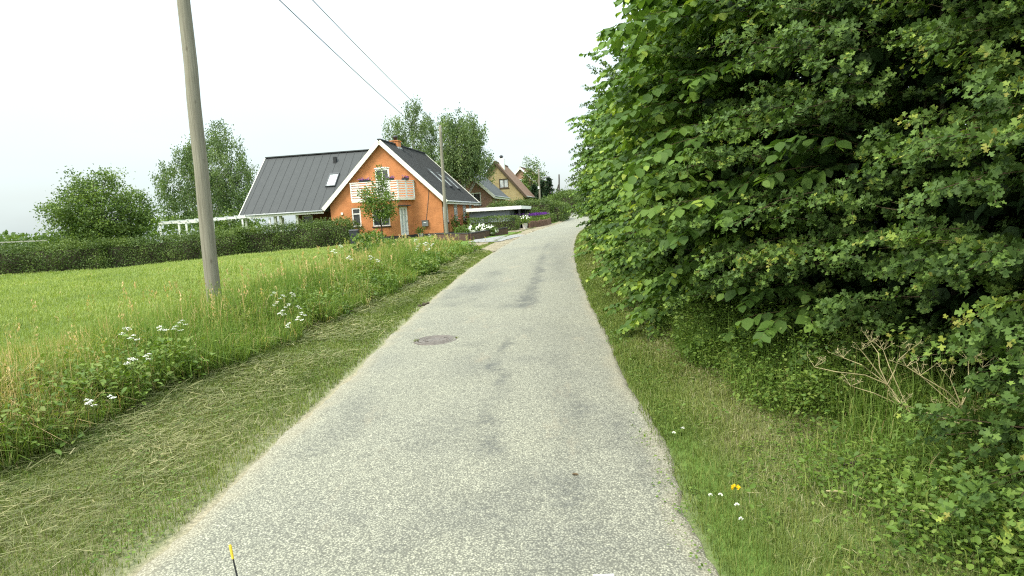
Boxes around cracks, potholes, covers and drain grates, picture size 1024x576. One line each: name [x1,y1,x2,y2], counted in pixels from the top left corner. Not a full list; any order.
manhole cover [414,335,459,345]
